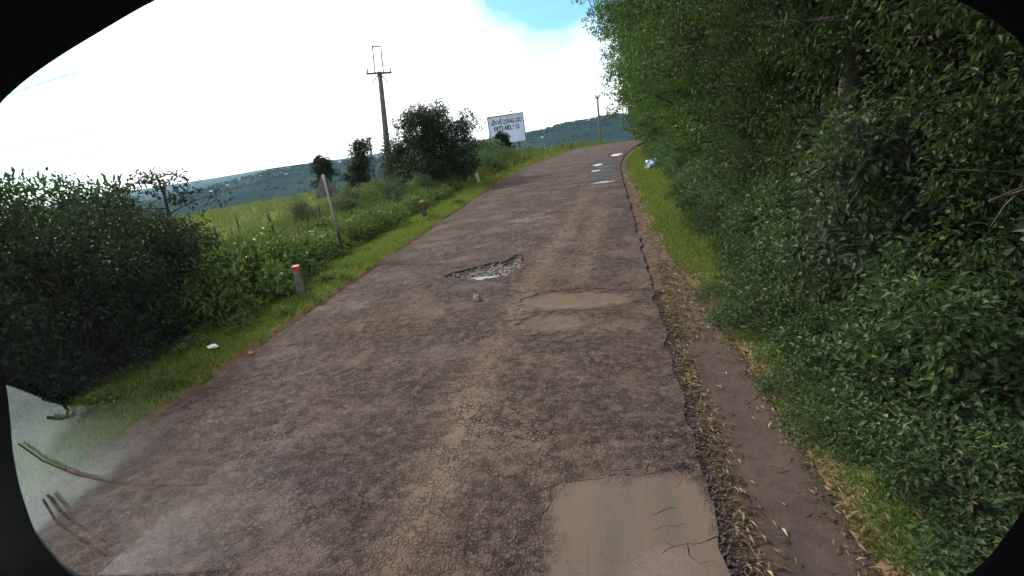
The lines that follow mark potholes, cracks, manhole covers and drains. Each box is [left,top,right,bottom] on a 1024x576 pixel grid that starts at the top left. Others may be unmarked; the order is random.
pothole [442,252,534,284]
